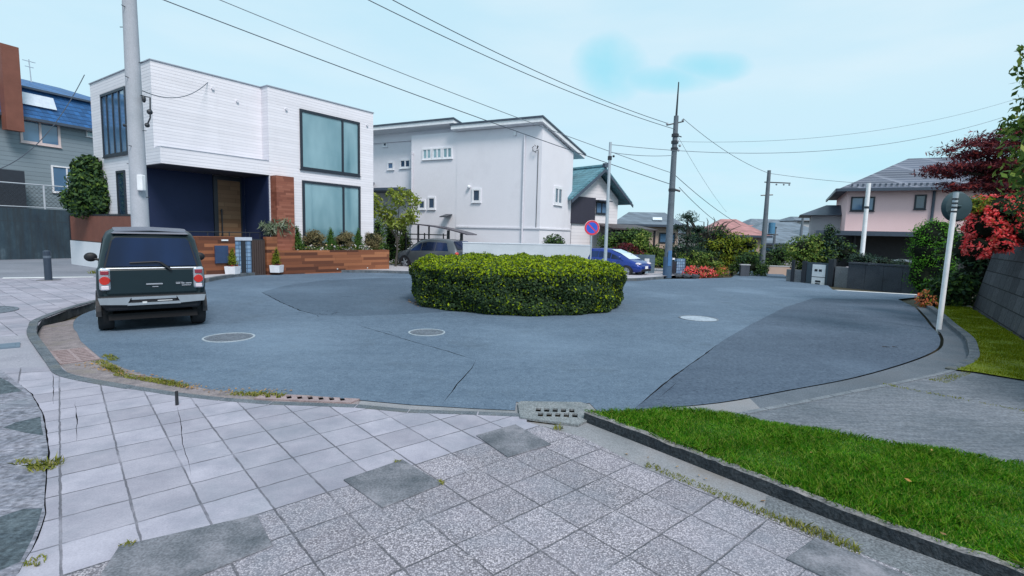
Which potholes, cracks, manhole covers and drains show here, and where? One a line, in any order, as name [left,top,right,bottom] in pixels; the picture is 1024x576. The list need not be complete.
drain grate [518,401,594,427]
drain grate [254,394,360,404]
manhole cover [202,332,255,343]
drain grate [50,347,100,365]
